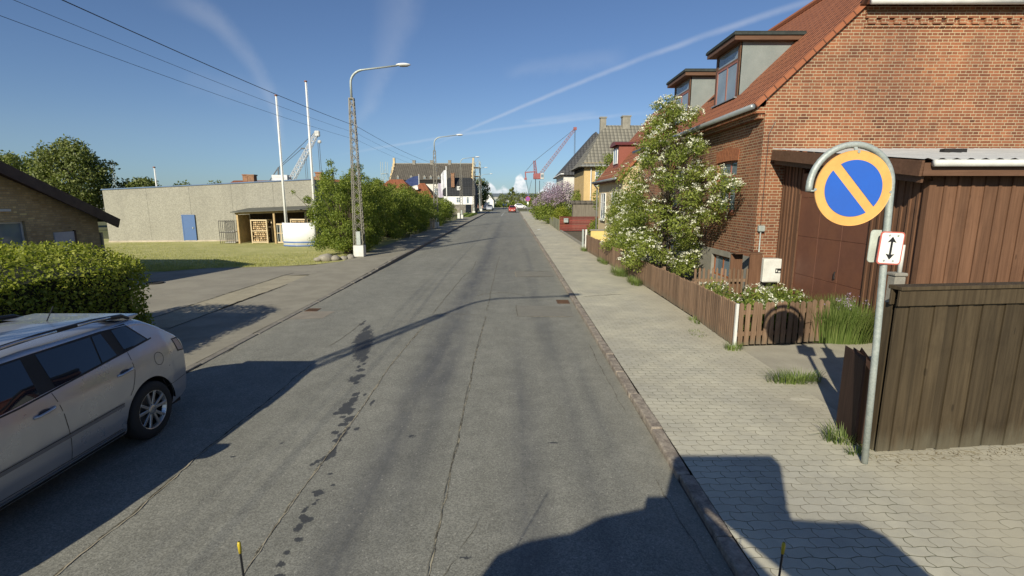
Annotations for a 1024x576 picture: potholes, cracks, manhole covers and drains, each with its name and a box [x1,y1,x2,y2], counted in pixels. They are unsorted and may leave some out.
crack [244,261,565,573]
